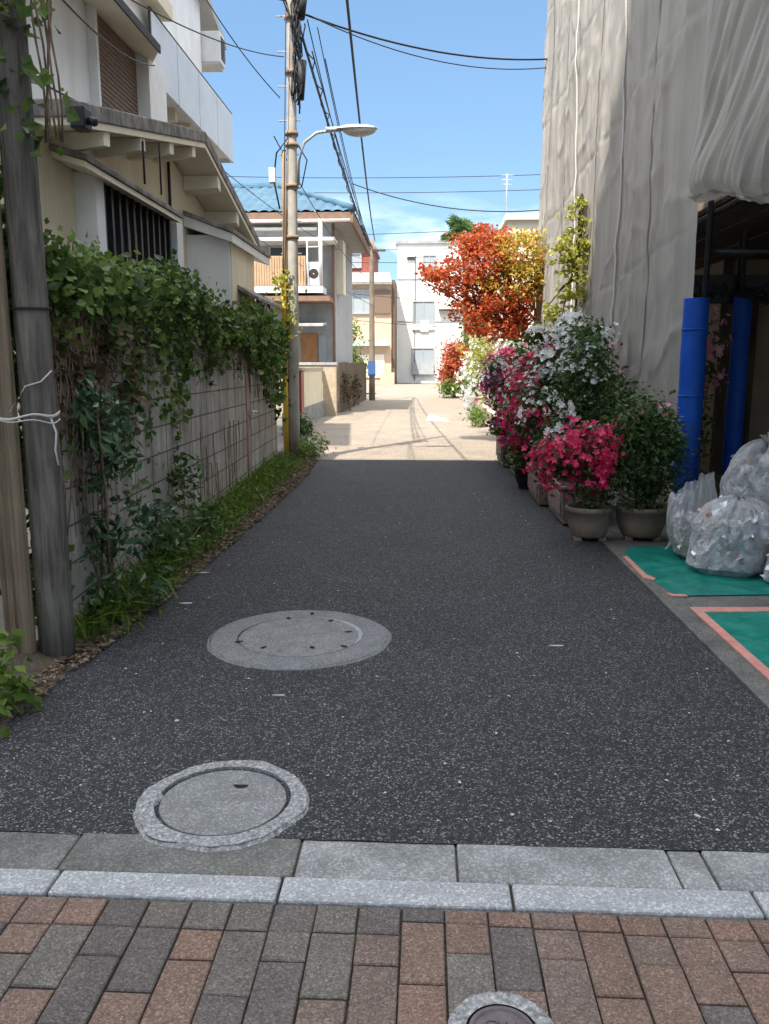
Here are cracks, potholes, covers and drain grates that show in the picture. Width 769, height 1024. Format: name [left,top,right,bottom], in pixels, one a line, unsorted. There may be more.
manhole cover [448,992,554,1024]
manhole cover [207,610,392,670]
manhole cover [133,760,310,853]
